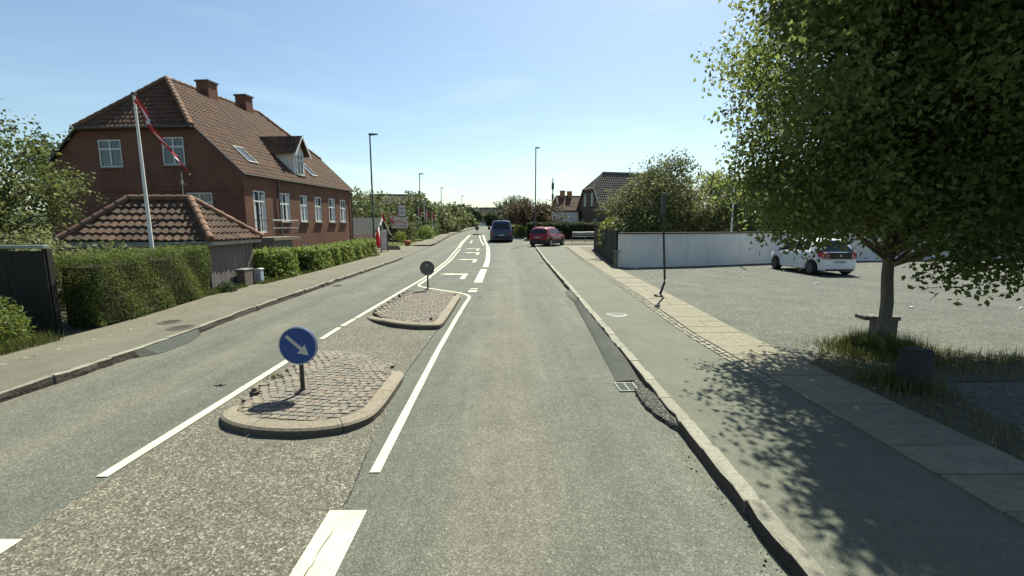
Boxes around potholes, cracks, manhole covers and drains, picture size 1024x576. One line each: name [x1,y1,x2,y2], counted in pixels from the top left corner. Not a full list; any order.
crack [343,442,372,508]
drain grate [613,382,638,392]
